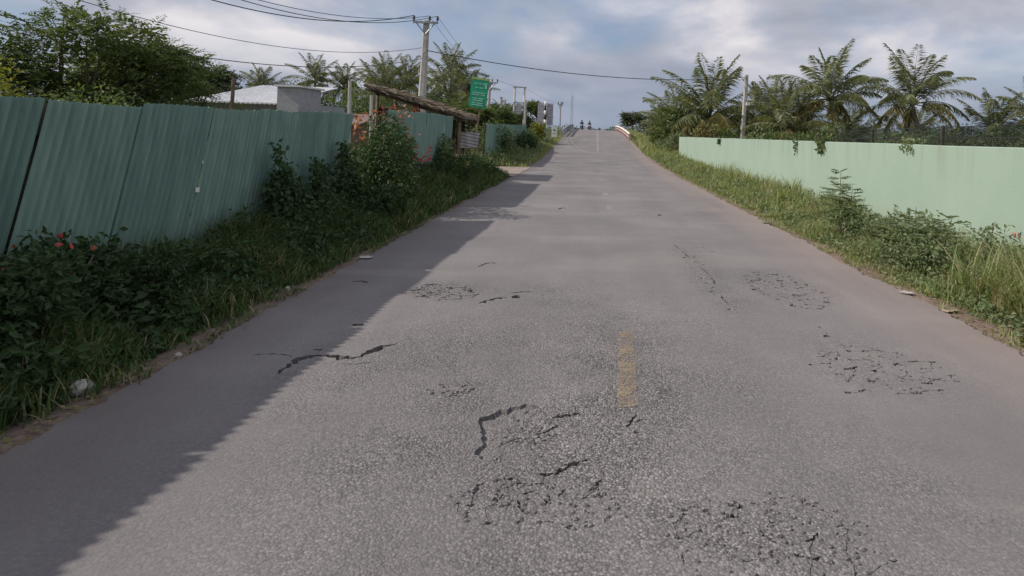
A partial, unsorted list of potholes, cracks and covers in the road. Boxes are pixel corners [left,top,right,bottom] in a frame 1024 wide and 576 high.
crack [664,491,898,576]
crack [426,384,474,396]
crack [448,459,630,530]
crack [673,245,733,310]
crack [256,343,398,374]
crack [808,327,959,394]
crack [409,284,508,303]
